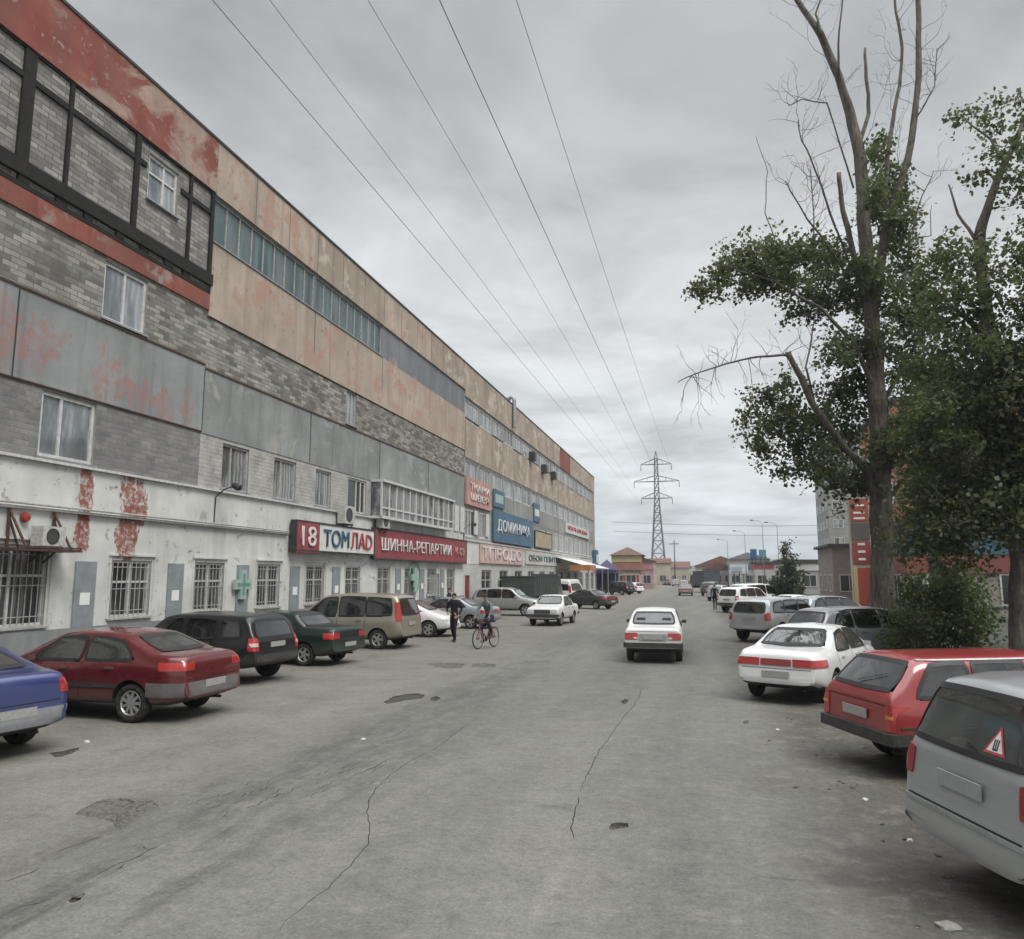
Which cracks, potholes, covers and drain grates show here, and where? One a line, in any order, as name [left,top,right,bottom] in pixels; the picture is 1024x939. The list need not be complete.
crack [91,845,159,878]
crack [191,723,469,936]
pothole [609,822,629,830]
pothole [49,747,79,757]
crack [570,688,702,837]
pothole [384,693,424,704]
